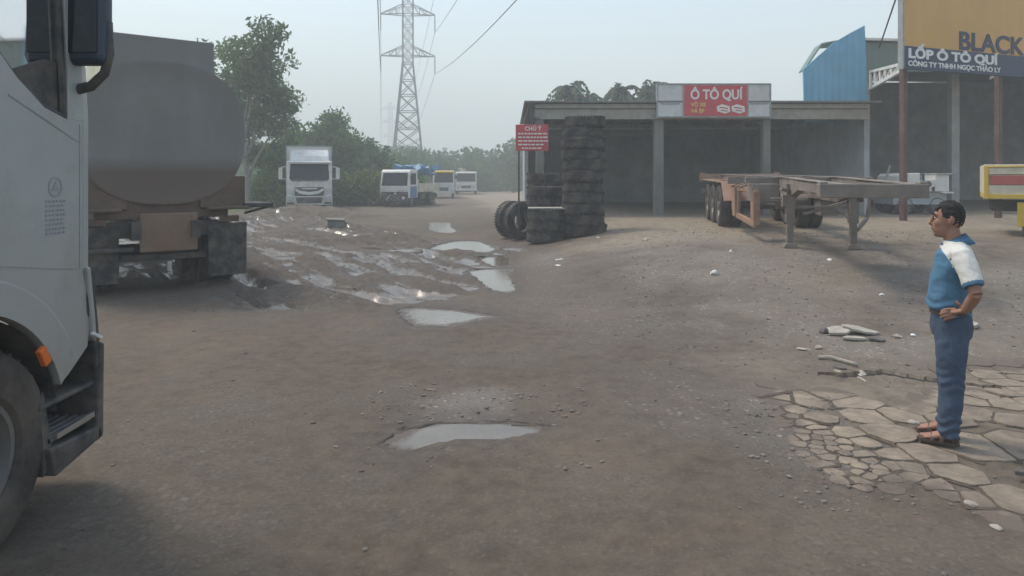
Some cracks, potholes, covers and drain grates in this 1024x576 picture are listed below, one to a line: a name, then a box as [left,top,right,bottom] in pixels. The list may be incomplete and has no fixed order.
crack [757,364,1024,522]
pothole [462,268,524,294]
pothole [424,240,502,254]
pothole [388,305,512,328]
pothole [423,221,461,233]
pothole [368,417,565,457]
